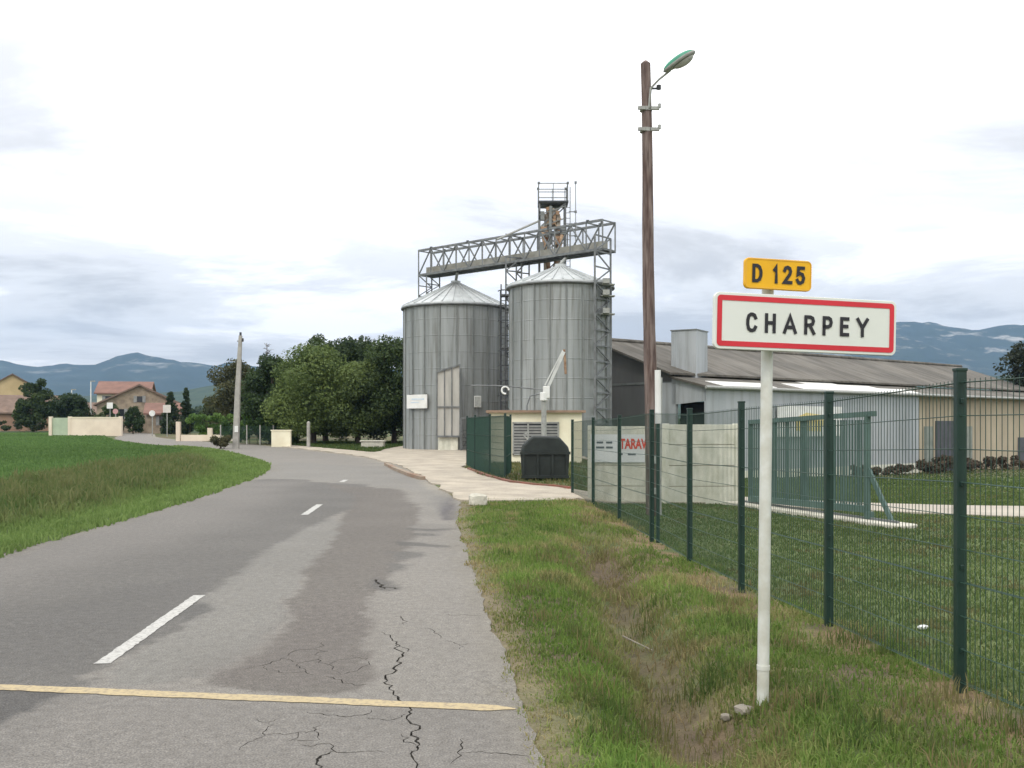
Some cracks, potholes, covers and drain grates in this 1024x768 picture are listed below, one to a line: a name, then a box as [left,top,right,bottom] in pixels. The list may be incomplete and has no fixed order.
crack [240,616,421,768]
crack [452,740,525,762]
